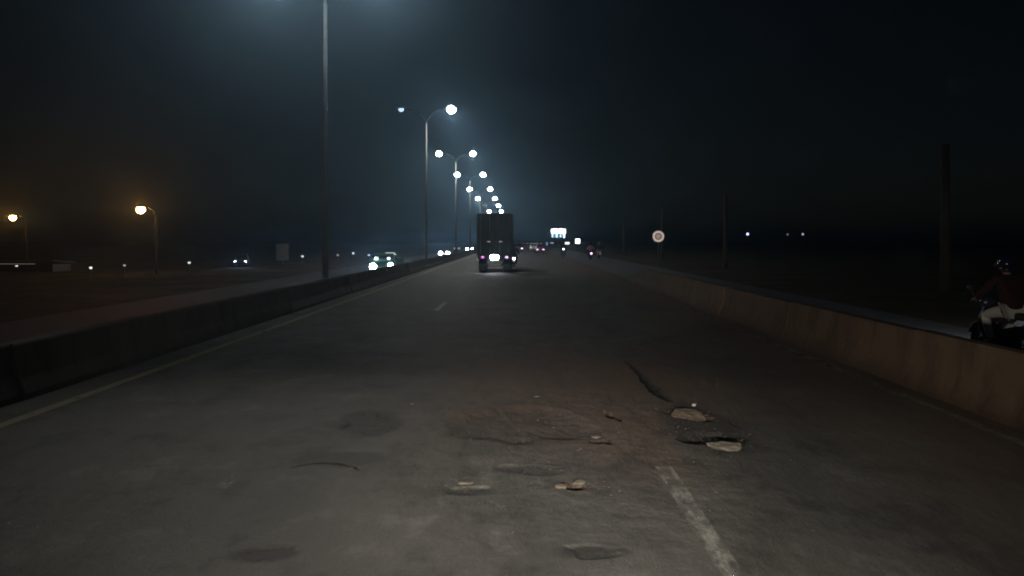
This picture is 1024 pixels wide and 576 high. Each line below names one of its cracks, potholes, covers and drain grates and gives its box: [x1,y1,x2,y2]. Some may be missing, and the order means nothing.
crack [291,462,359,470]
pothole [675,430,754,447]
pothole [493,464,567,477]
pothole [336,409,408,437]
pothole [445,485,492,495]
pothole [438,404,607,446]
pothole [563,482,588,491]
pothole [235,545,303,562]
crack [624,360,673,402]
pothole [660,406,718,422]
pothole [560,543,625,560]
